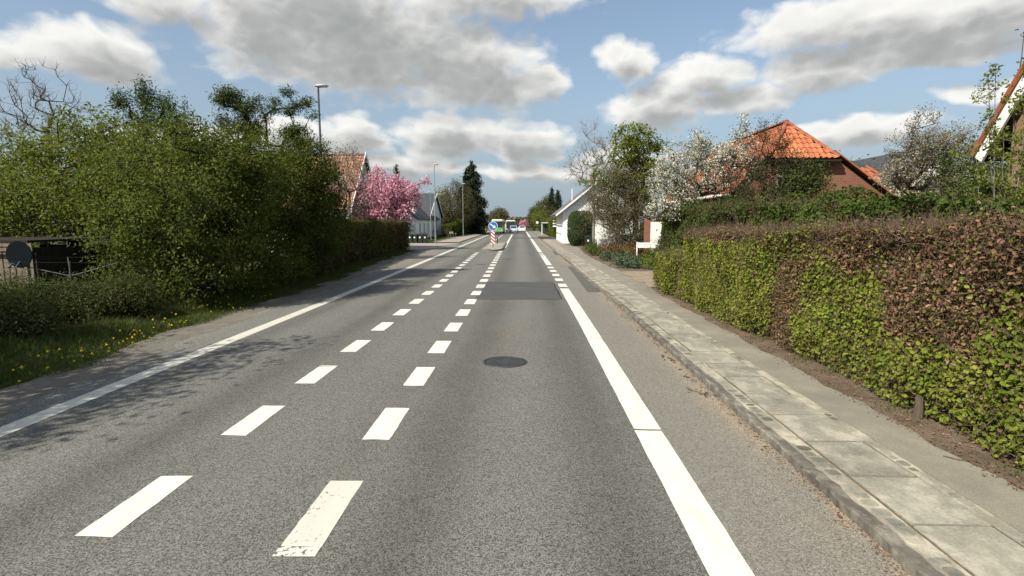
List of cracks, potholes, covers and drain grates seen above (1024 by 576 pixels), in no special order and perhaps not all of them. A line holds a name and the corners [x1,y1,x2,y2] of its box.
manhole cover [483,356,527,368]
